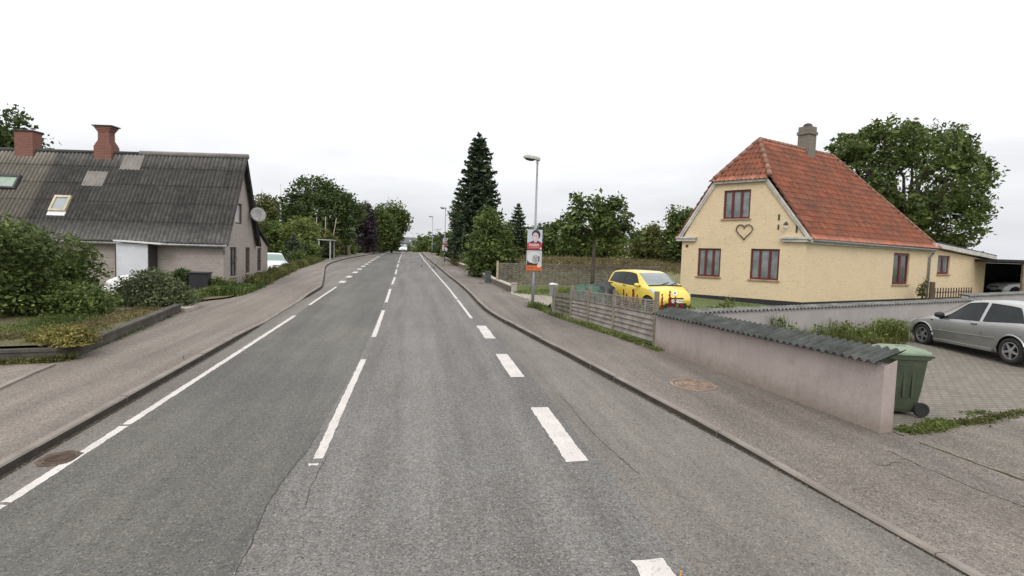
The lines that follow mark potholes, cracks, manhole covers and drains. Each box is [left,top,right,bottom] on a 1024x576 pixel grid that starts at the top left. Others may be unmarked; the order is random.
manhole cover [669,378,718,391]
crack [558,394,639,474]
crack [304,454,329,508]
crack [872,442,1024,506]
